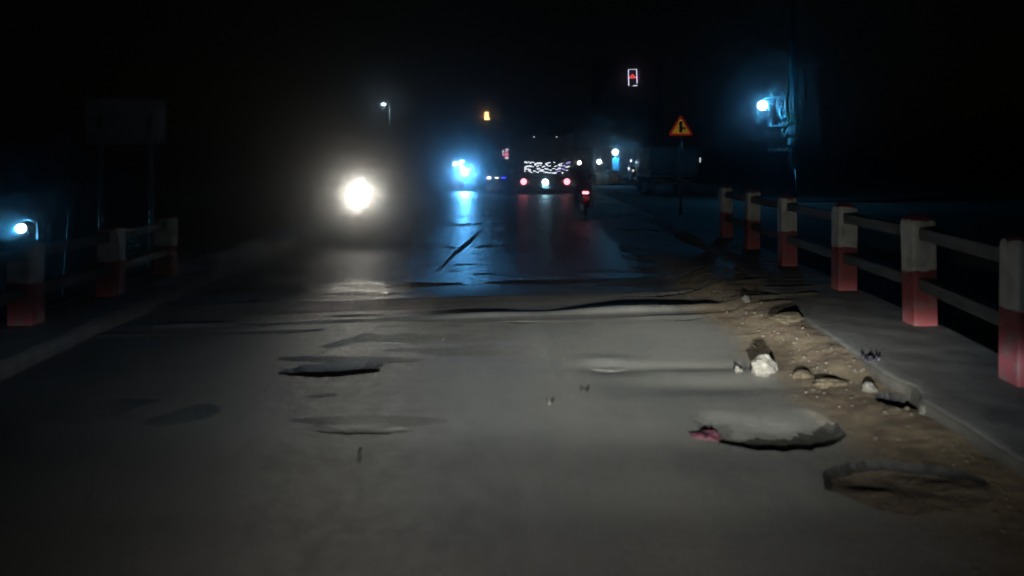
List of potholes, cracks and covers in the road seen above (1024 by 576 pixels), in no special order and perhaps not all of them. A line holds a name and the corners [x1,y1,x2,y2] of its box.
crack [485,266,717,324]
crack [435,227,484,273]
pothole [305,423,416,435]
pothole [277,361,383,378]
pothole [691,402,846,452]
pothole [821,460,998,515]
pothole [874,391,907,408]
